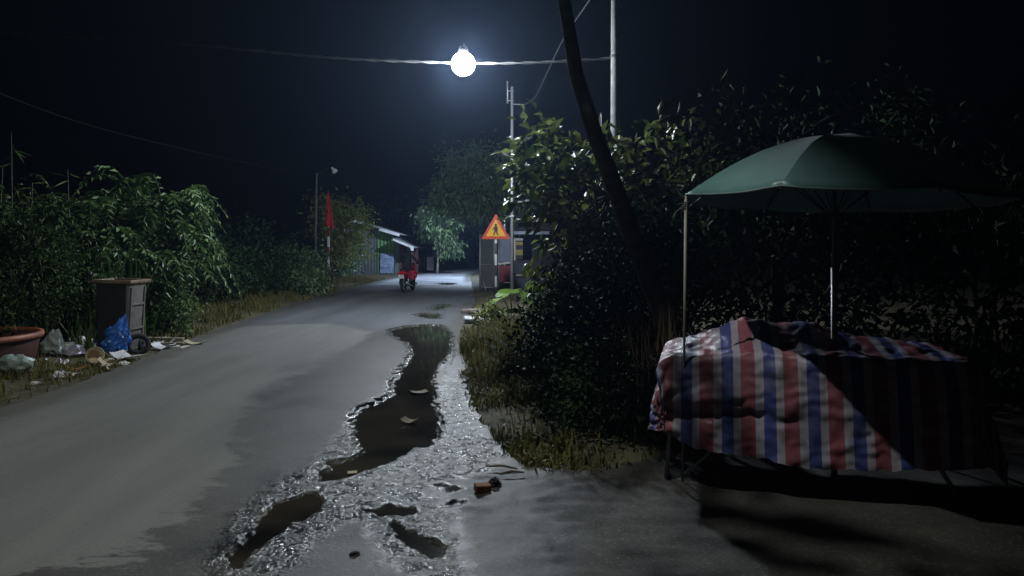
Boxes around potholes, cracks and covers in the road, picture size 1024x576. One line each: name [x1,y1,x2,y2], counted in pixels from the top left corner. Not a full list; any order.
pothole [317,324,454,482]
pothole [388,520,449,560]
pothole [358,503,418,517]
pothole [224,491,328,573]
